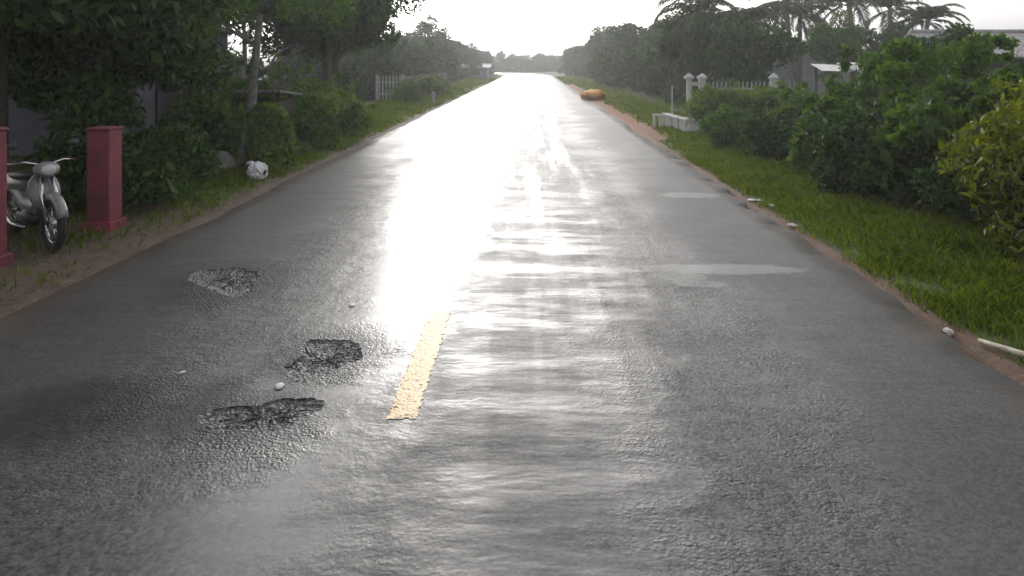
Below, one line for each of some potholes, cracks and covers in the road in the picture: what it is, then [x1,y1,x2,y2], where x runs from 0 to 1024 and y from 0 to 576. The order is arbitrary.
pothole [284,339,363,382]
pothole [188,267,261,297]
pothole [199,397,326,432]
